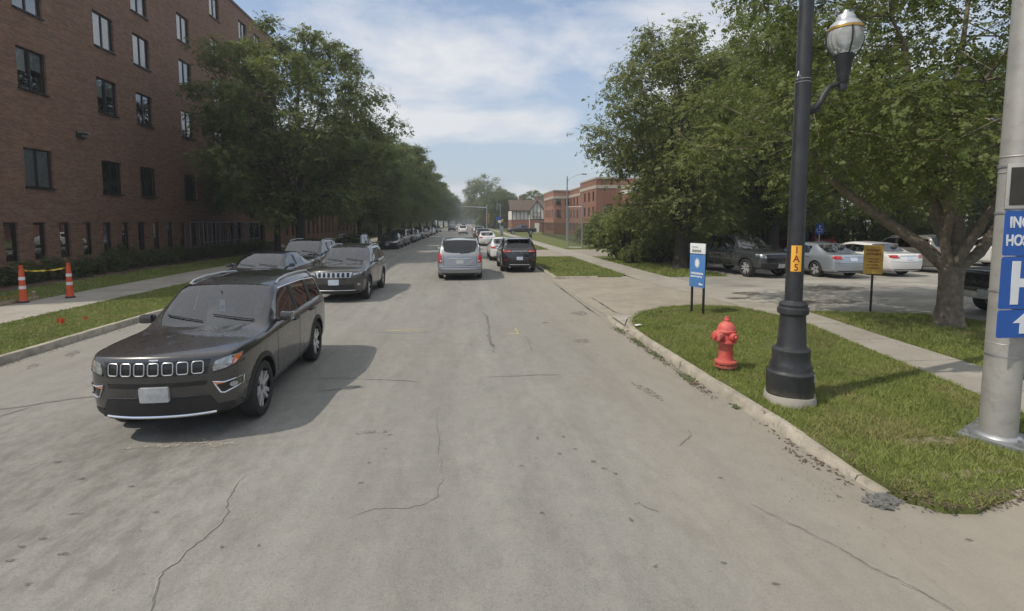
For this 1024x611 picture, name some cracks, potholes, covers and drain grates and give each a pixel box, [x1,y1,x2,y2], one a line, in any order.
crack [356,418,444,515]
crack [0,396,95,416]
crack [149,476,245,611]
